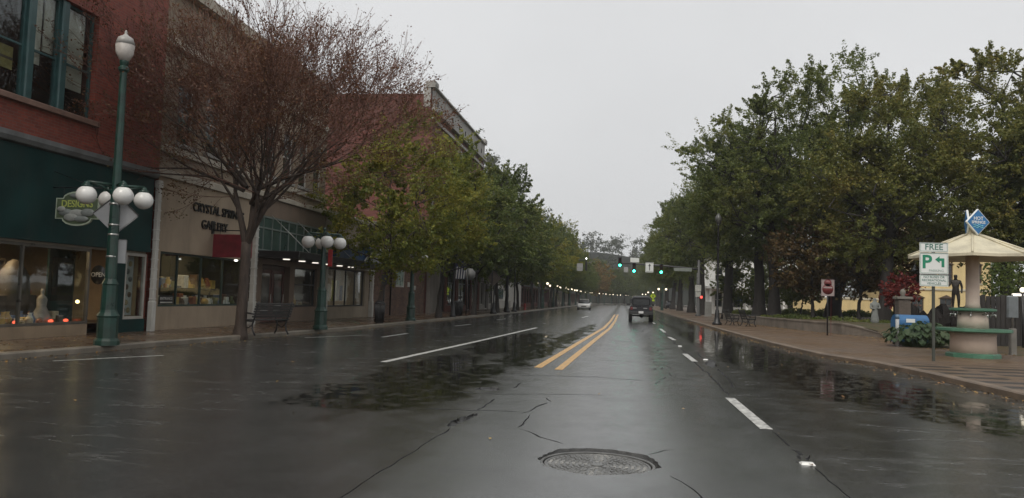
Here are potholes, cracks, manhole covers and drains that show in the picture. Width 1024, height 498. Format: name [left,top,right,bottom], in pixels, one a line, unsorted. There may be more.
manhole cover [538,448,661,475]
crack [517,398,563,444]
